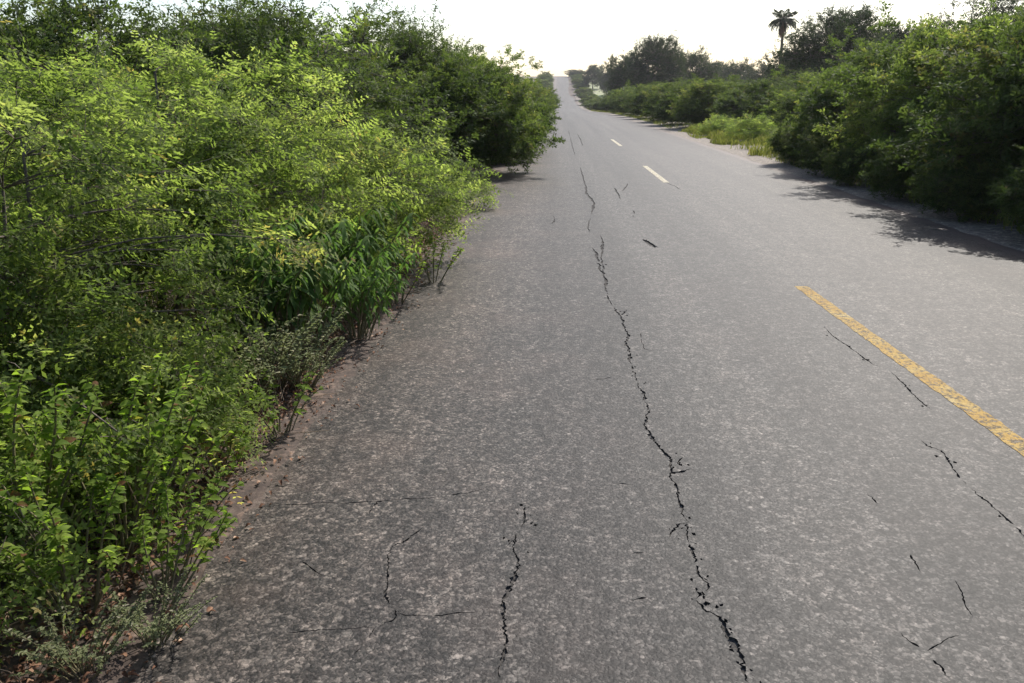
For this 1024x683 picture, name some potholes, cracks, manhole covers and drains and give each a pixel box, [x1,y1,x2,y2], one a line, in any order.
crack [289,525,474,655]
crack [569,134,761,683]
crack [272,489,481,513]
crack [901,633,959,677]
crack [498,504,538,678]
